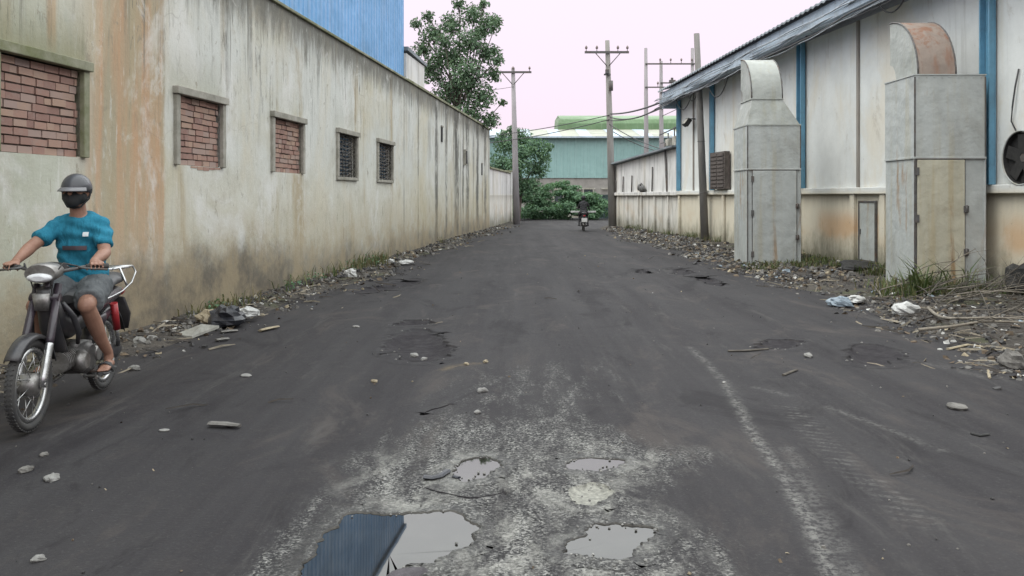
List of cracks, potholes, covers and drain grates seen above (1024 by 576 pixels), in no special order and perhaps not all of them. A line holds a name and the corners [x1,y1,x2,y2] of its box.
pothole [646,267,709,276]
pothole [548,477,636,513]
pothole [677,274,747,288]
pothole [538,515,682,571]
pothole [271,503,504,576]
pothole [433,452,521,489]
crack [413,403,460,415]
pothole [547,453,644,478]
crack [409,483,512,506]
